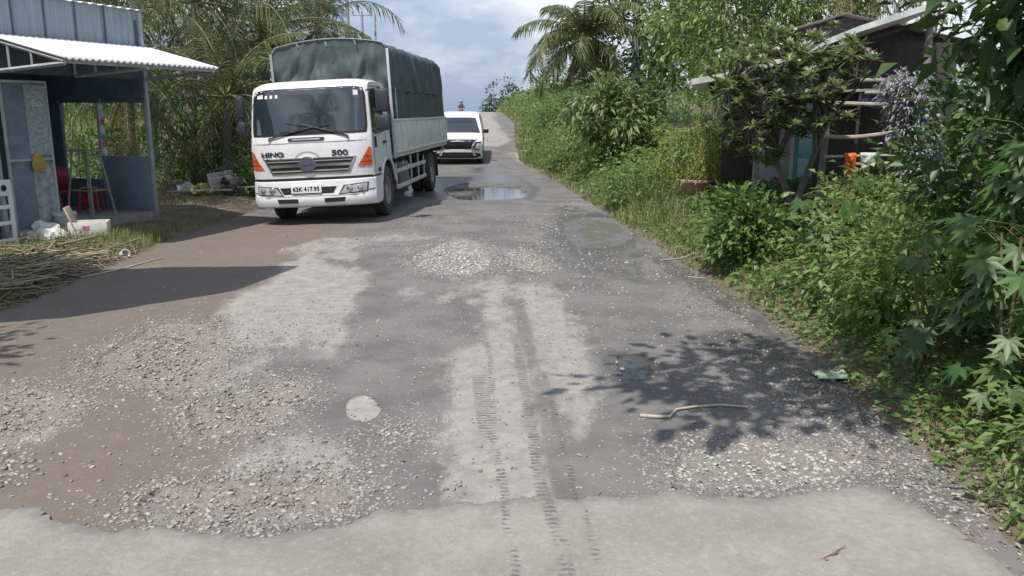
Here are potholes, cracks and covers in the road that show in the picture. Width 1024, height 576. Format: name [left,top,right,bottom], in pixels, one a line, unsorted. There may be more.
pothole [91,323,233,393]
pothole [615,351,657,382]
pothole [671,438,865,490]
pothole [409,238,492,275]
pothole [186,378,306,437]
pothole [0,388,82,445]
pothole [136,471,356,528]
pothole [443,182,529,200]
